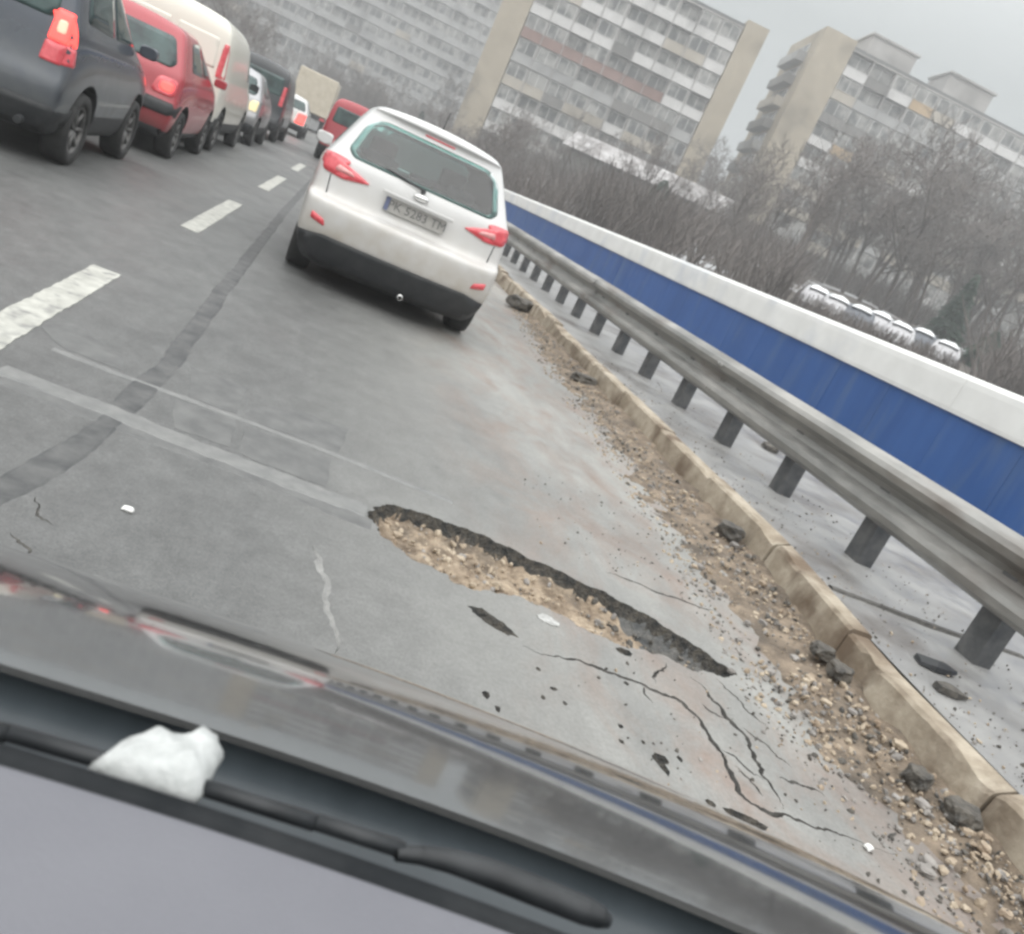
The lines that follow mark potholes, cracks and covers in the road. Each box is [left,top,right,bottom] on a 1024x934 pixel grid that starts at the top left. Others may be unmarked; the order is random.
pothole [368,504,737,678]
crack [312,546,341,654]
crack [10,496,52,553]
crack [525,646,891,854]
